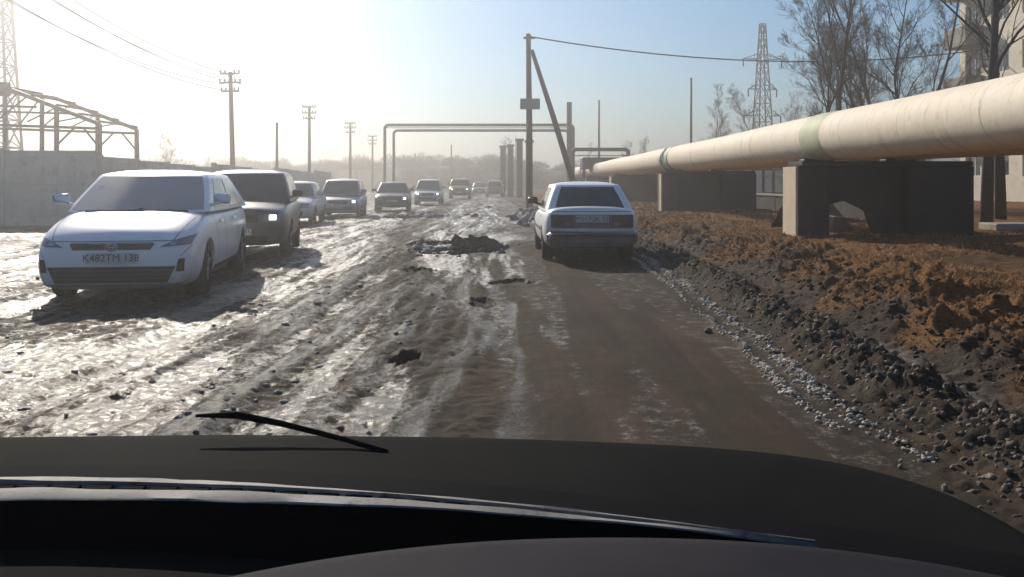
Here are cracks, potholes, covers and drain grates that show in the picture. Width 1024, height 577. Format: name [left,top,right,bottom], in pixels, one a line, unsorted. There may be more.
pothole [377,347,437,371]
